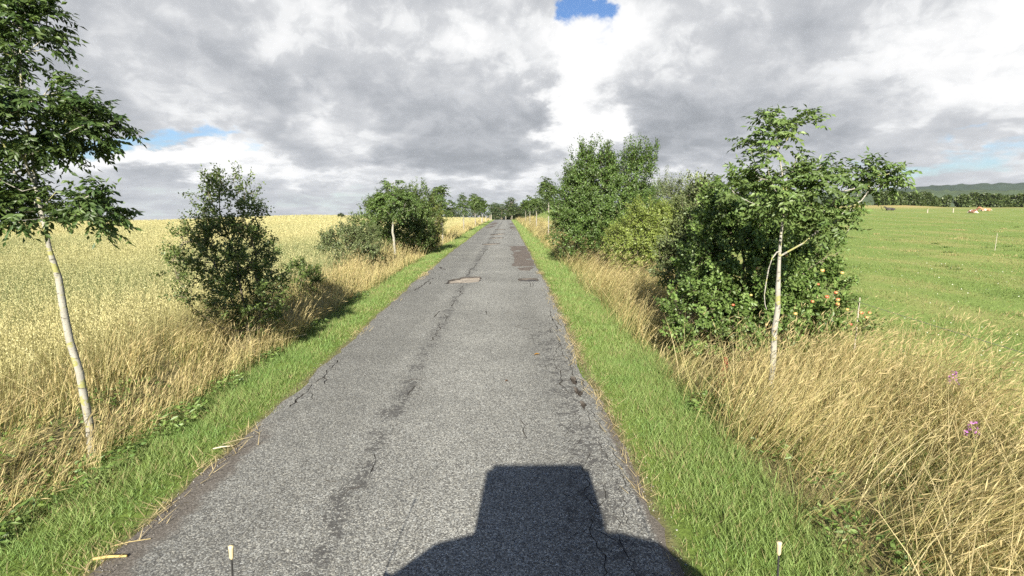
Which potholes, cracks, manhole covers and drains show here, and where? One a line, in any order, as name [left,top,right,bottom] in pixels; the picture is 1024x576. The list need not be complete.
crack [533,311,585,392]
crack [559,405,636,576]
crack [289,360,338,407]
